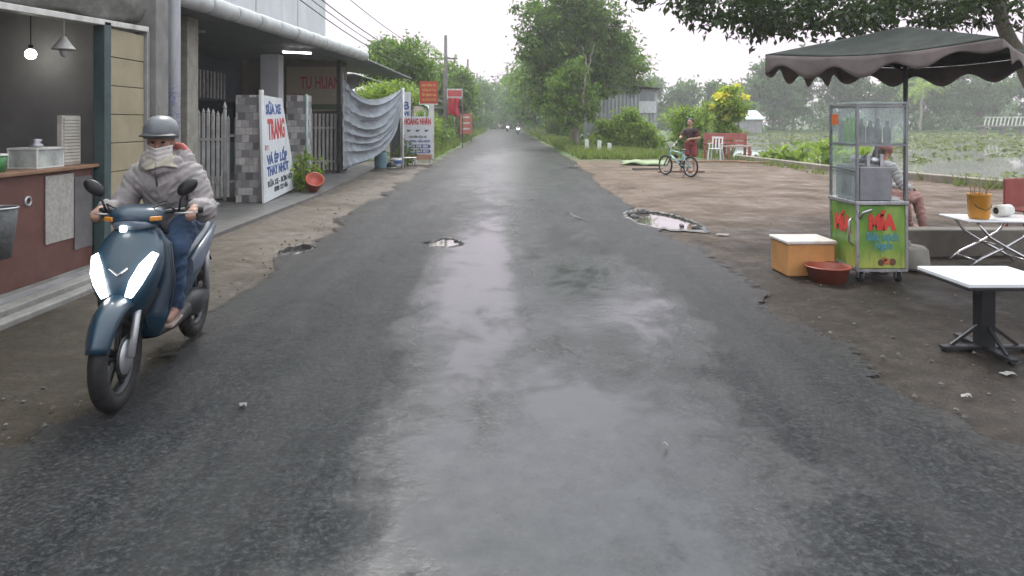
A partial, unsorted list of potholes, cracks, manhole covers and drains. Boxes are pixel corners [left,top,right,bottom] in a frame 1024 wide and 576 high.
pothole [622,208,710,233]
pothole [428,238,461,247]
pothole [279,244,314,255]
